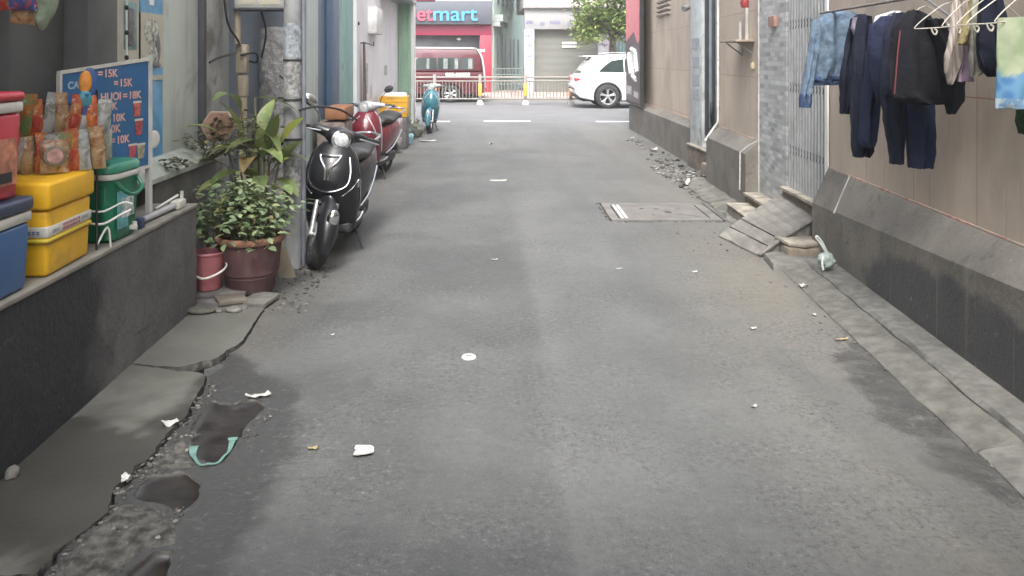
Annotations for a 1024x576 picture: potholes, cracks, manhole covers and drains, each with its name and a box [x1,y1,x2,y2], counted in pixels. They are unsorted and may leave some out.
pothole [133,470,200,512]
pothole [190,399,265,463]
crack [108,310,264,513]
manhole cover [596,203,725,223]
